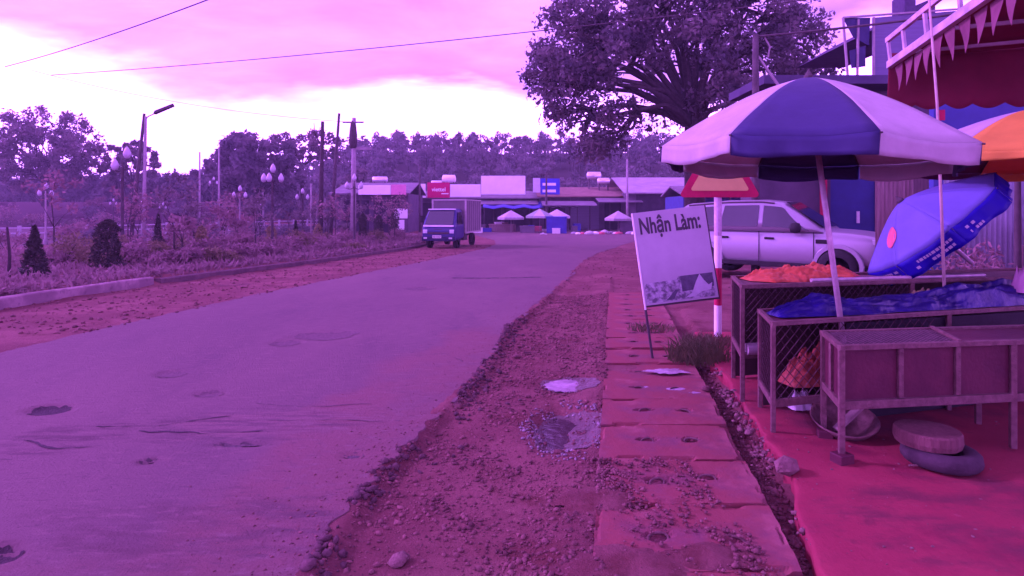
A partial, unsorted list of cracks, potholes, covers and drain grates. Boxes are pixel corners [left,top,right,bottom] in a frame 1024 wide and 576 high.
pothole [533,410,602,452]
pothole [195,390,224,398]
crack [9,440,98,460]
crack [98,403,381,434]
pothole [294,331,359,340]
pothole [0,545,25,564]
pothole [29,405,71,415]
